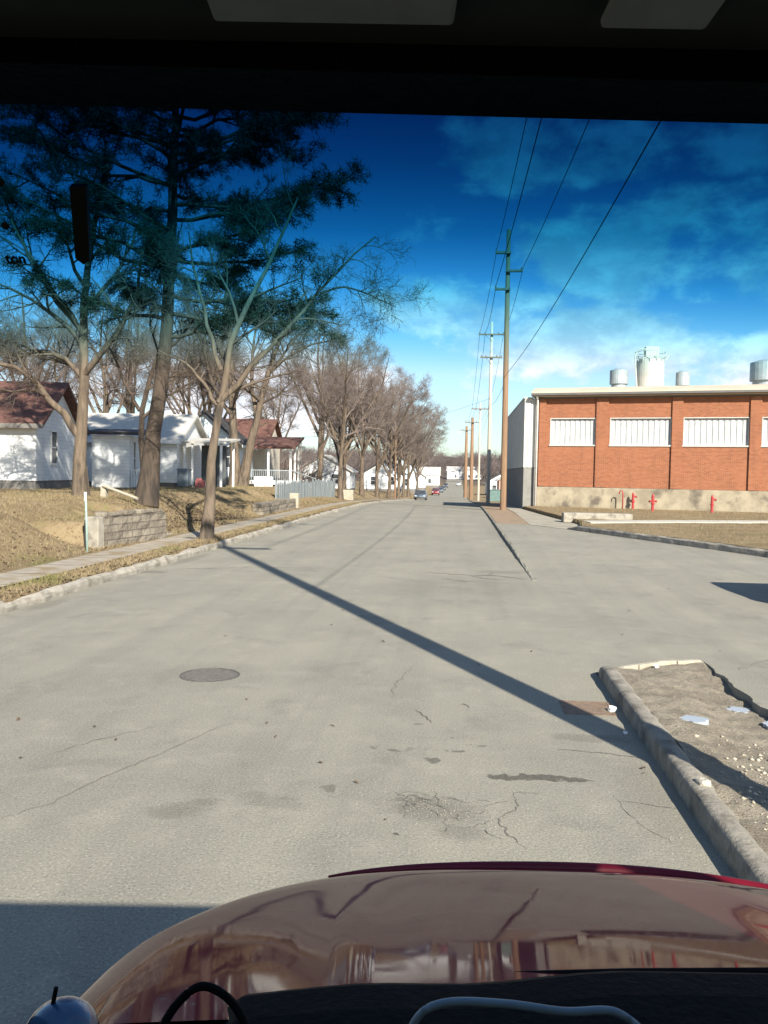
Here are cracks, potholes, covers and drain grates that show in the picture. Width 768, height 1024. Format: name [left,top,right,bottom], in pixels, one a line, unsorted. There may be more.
manhole cover [179,668,240,683]
crack [388,789,543,849]
crack [8,723,229,816]
